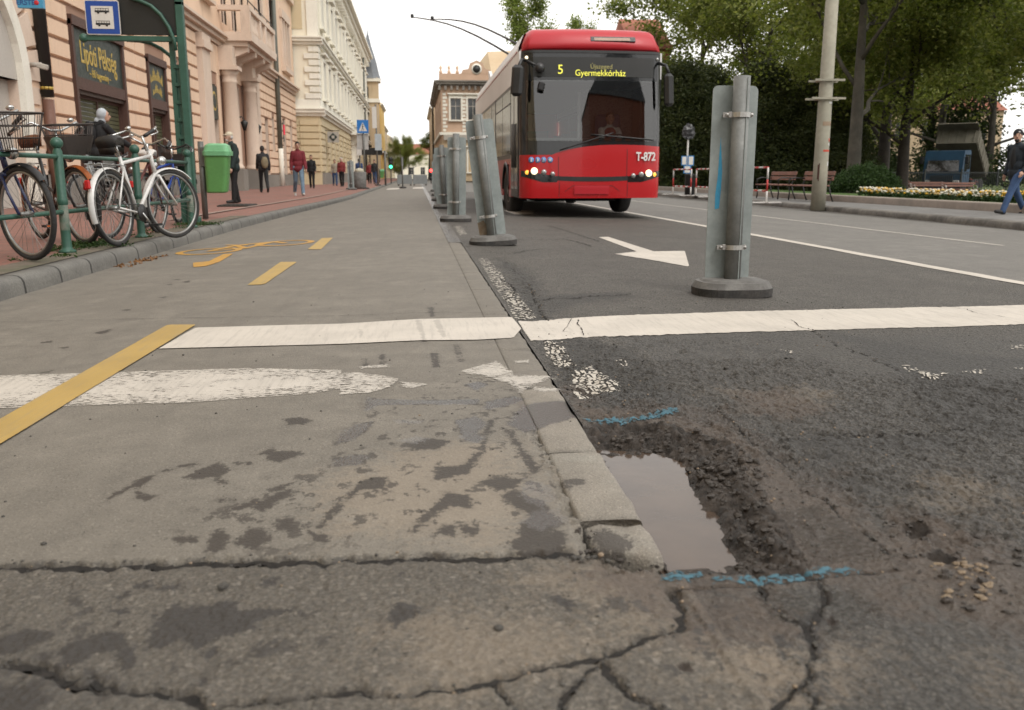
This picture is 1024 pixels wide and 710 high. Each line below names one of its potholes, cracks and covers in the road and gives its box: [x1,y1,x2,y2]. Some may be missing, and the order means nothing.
crack [0,552,577,573]
pothole [583,420,807,578]
crack [500,278,631,335]
crack [3,573,878,710]
